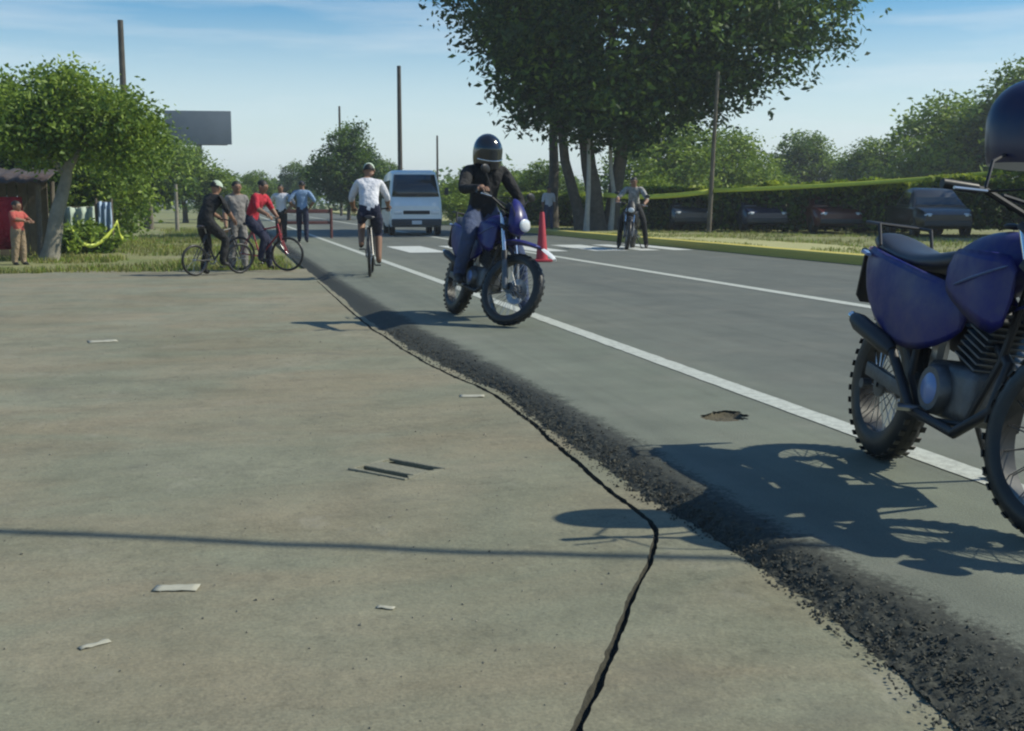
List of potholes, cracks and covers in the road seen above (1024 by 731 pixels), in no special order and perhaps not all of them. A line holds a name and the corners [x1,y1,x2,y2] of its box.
pothole [700,410,749,422]
crack [317,281,659,731]
